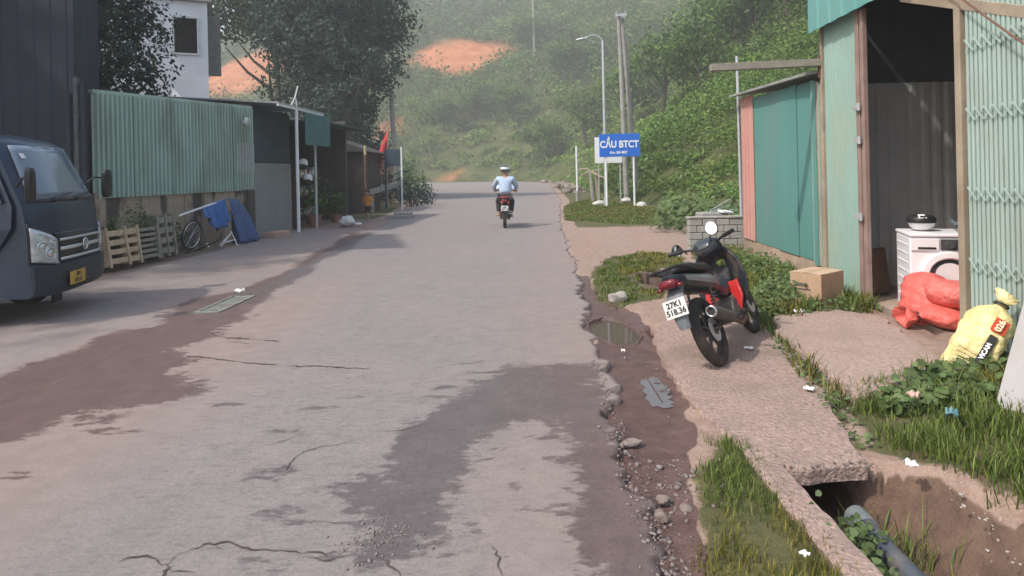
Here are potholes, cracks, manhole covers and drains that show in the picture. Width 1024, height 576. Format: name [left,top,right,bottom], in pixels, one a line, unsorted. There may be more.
crack [187,332,367,369]
crack [118,541,400,576]
crack [267,424,423,473]
pothole [586,316,644,348]
drain grate [193,295,256,314]
